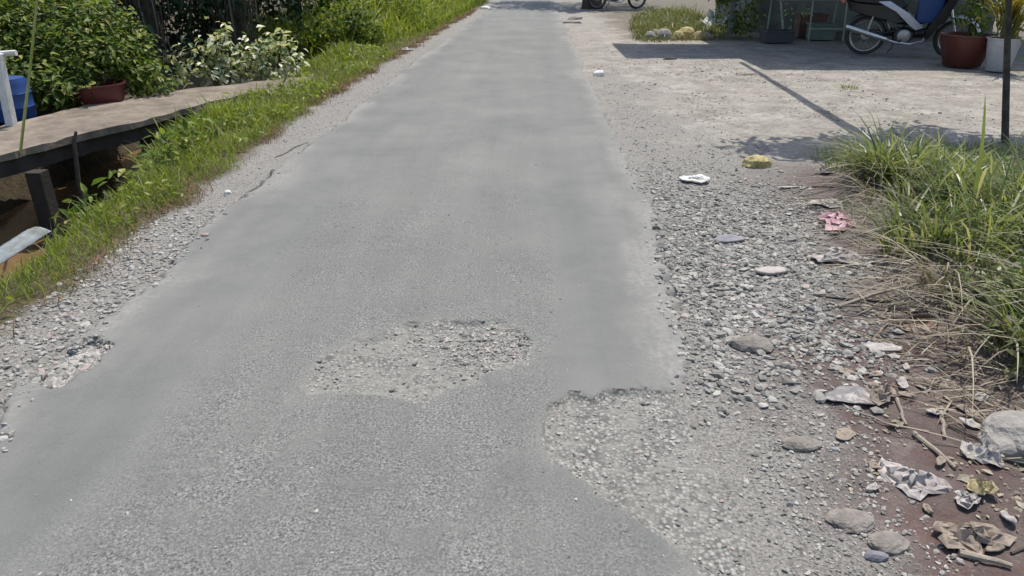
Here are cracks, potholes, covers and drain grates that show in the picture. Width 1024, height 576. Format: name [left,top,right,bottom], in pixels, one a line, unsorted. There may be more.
crack [241,142,308,198]
pothole [300,317,539,408]
pothole [539,386,757,576]
pothole [22,336,115,389]
